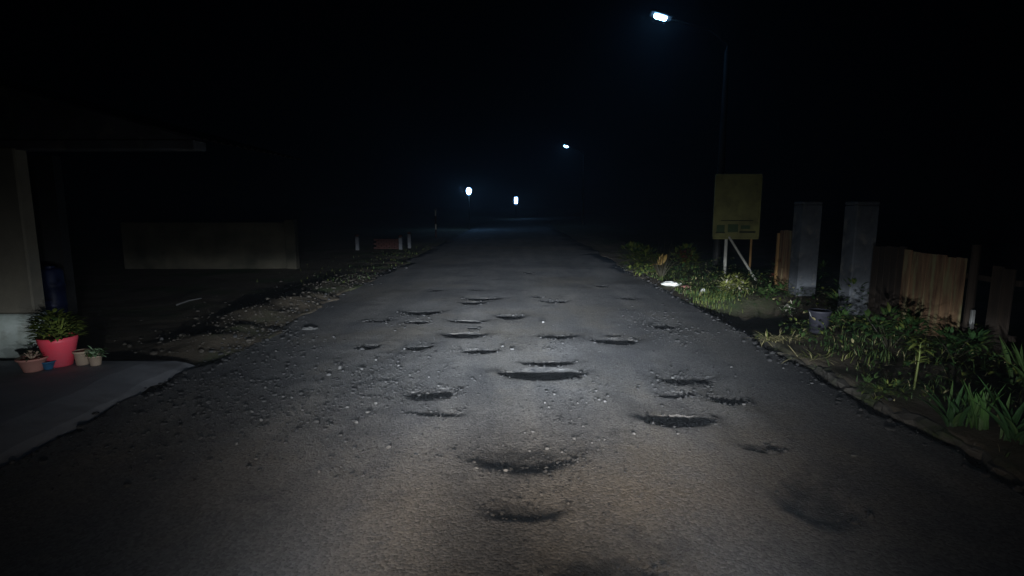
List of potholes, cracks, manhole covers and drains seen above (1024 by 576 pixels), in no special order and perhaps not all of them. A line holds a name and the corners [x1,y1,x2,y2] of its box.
pothole [737,442,795,455]
pothole [658,391,702,399]
pothole [591,337,644,346]
pothole [401,383,461,403]
pothole [455,441,585,481]
pothole [661,370,717,387]
pothole [474,496,577,525]
pothole [763,471,878,540]
pothole [642,414,720,429]
pothole [496,367,584,382]
pothole [405,406,469,418]
